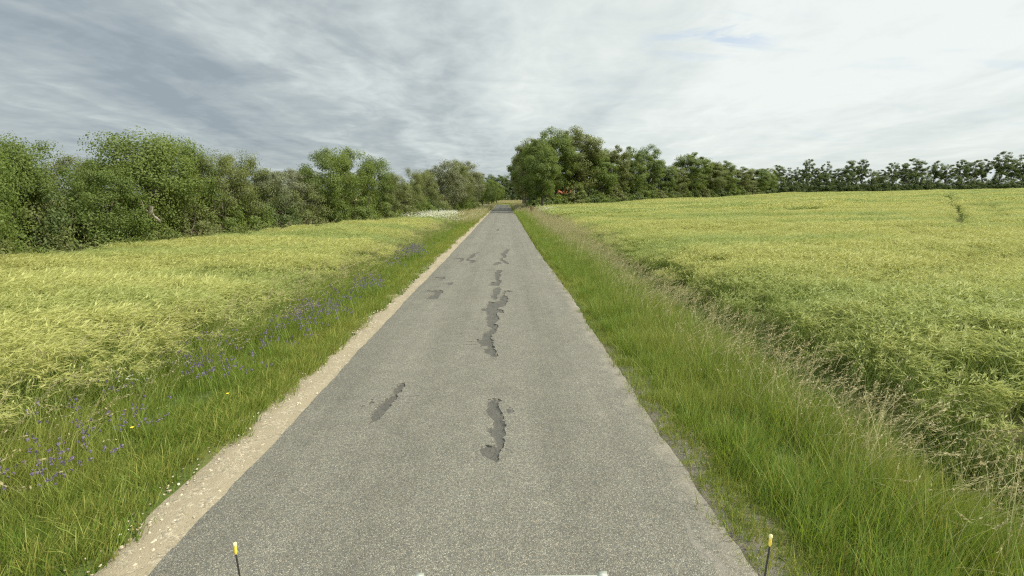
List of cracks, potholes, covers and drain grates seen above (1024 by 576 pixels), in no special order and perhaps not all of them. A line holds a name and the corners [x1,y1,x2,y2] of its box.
pothole [479,398,506,463]
pothole [476,290,511,357]
pothole [489,270,502,286]
pothole [366,382,405,425]
